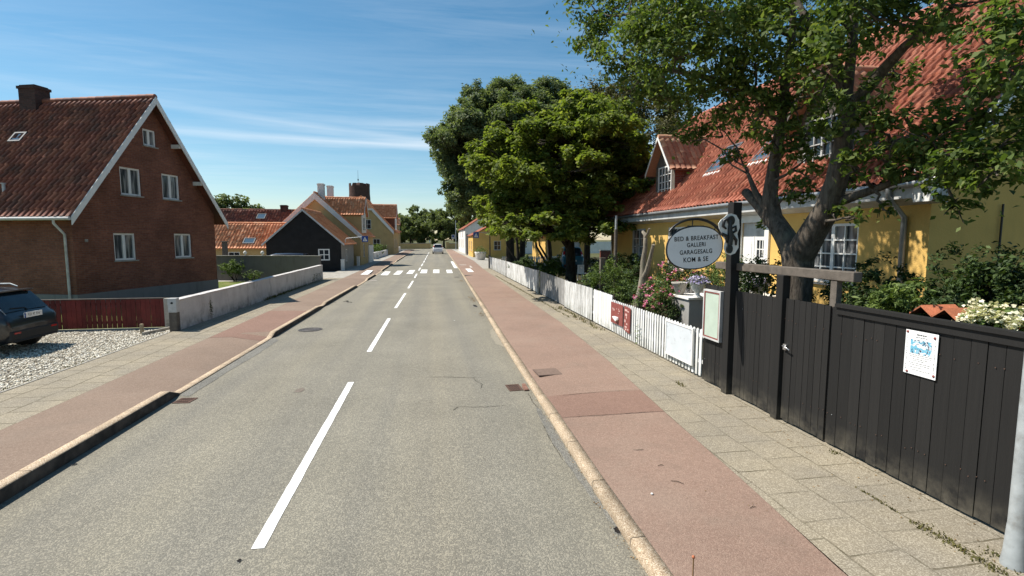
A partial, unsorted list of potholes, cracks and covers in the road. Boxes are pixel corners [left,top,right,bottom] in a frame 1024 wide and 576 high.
utility cover [533,368,562,376]
